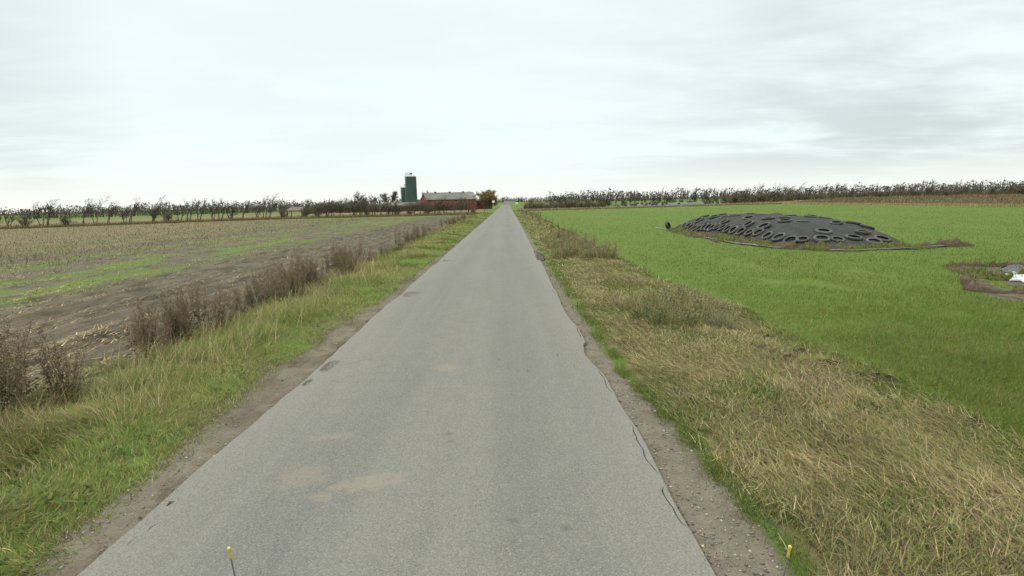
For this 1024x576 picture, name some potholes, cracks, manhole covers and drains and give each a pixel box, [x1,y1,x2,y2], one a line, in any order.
crack [632,425,685,526]
